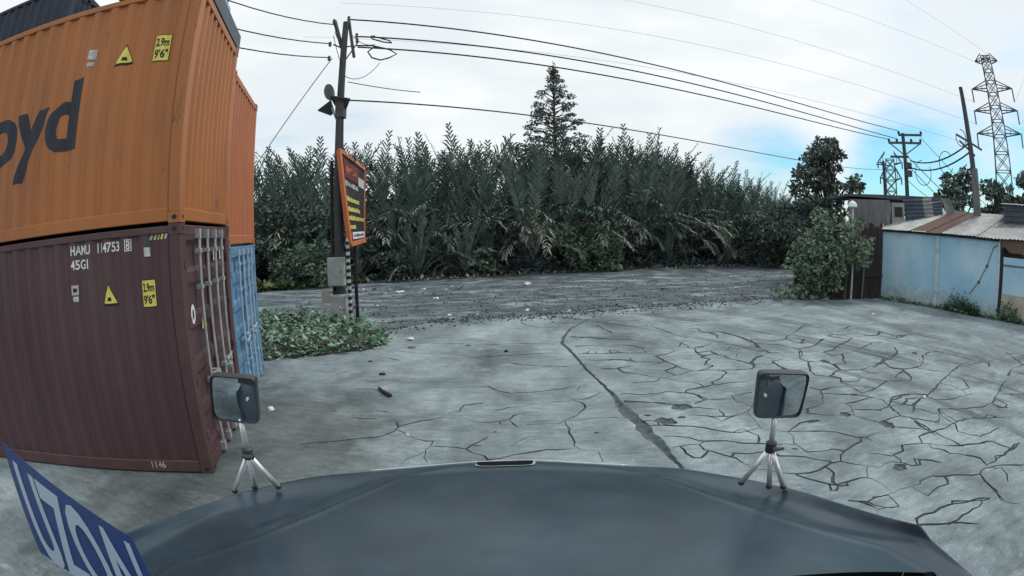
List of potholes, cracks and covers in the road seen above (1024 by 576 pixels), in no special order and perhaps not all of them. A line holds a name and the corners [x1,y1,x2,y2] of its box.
crack [300,353,619,463]
crack [569,324,1024,526]
pothole [654,417,678,426]
